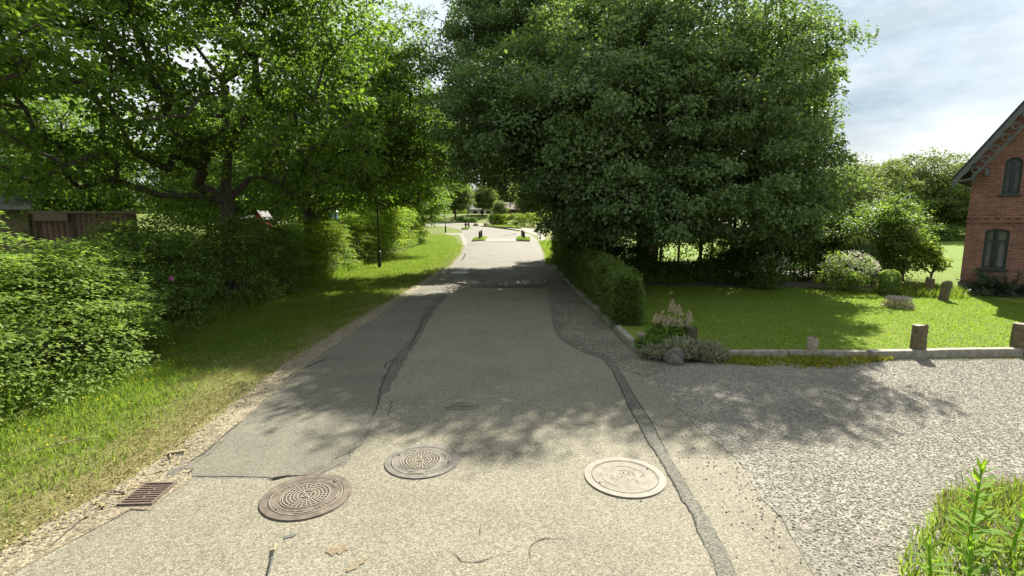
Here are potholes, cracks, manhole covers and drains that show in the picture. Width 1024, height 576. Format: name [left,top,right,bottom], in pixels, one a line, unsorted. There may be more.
manhole cover [259,474,352,522]
manhole cover [584,457,667,499]
manhole cover [384,444,459,479]
drain grate [117,481,177,506]
